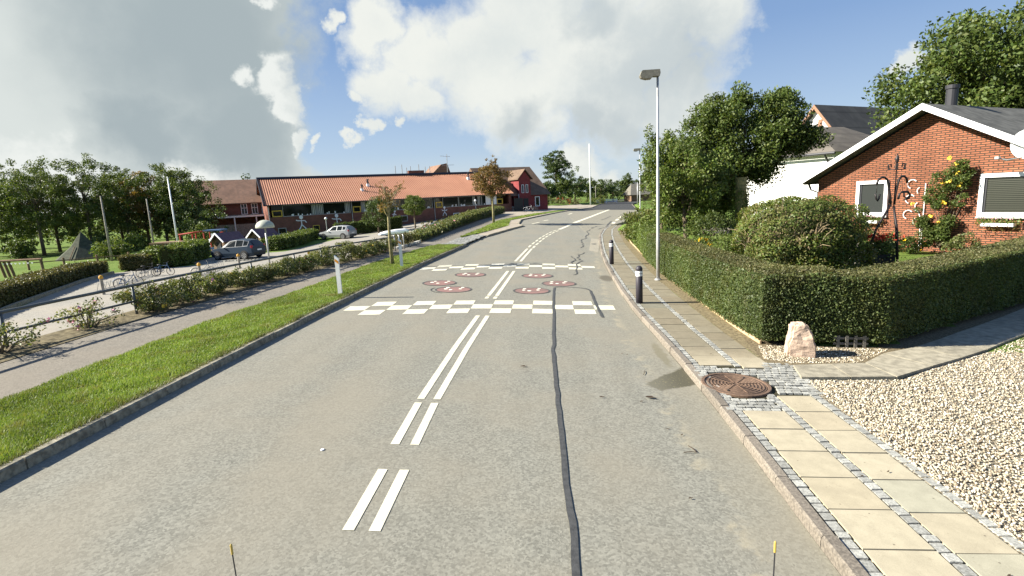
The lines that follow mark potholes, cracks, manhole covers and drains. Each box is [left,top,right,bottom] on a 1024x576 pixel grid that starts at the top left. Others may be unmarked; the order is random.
manhole cover [701,373,772,398]
crack [571,217,608,275]
